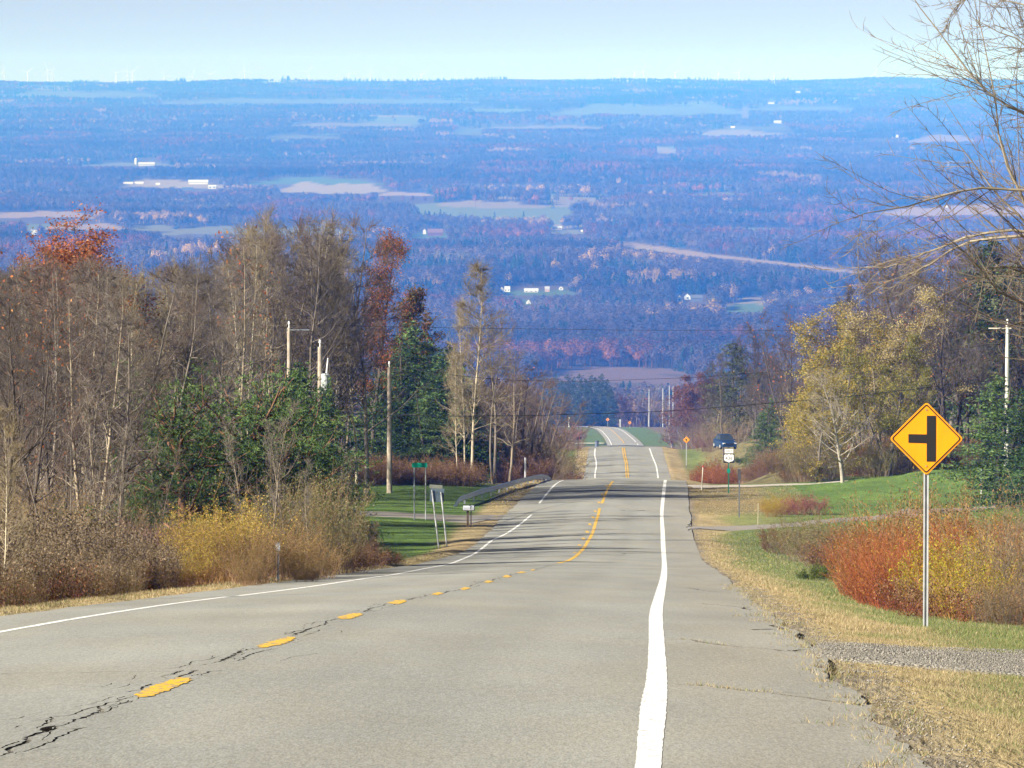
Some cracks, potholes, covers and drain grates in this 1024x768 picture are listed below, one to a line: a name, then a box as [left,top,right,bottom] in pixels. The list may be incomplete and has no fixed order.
crack [627,681,867,706]
crack [635,625,824,659]
crack [1,565,553,756]
